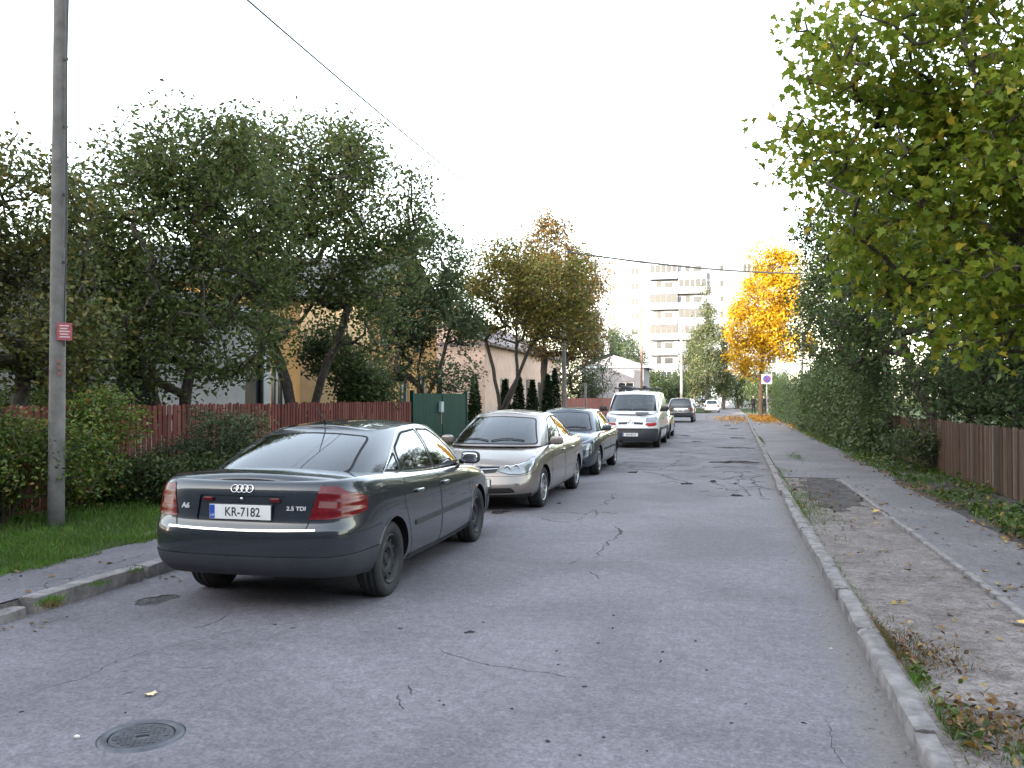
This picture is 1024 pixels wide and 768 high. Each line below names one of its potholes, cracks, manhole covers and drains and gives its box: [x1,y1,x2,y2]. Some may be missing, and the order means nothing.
crack [21,614,241,699]
crack [439,648,581,678]
crack [623,452,773,500]
crack [545,492,623,580]
manhole cover [95,719,186,754]
